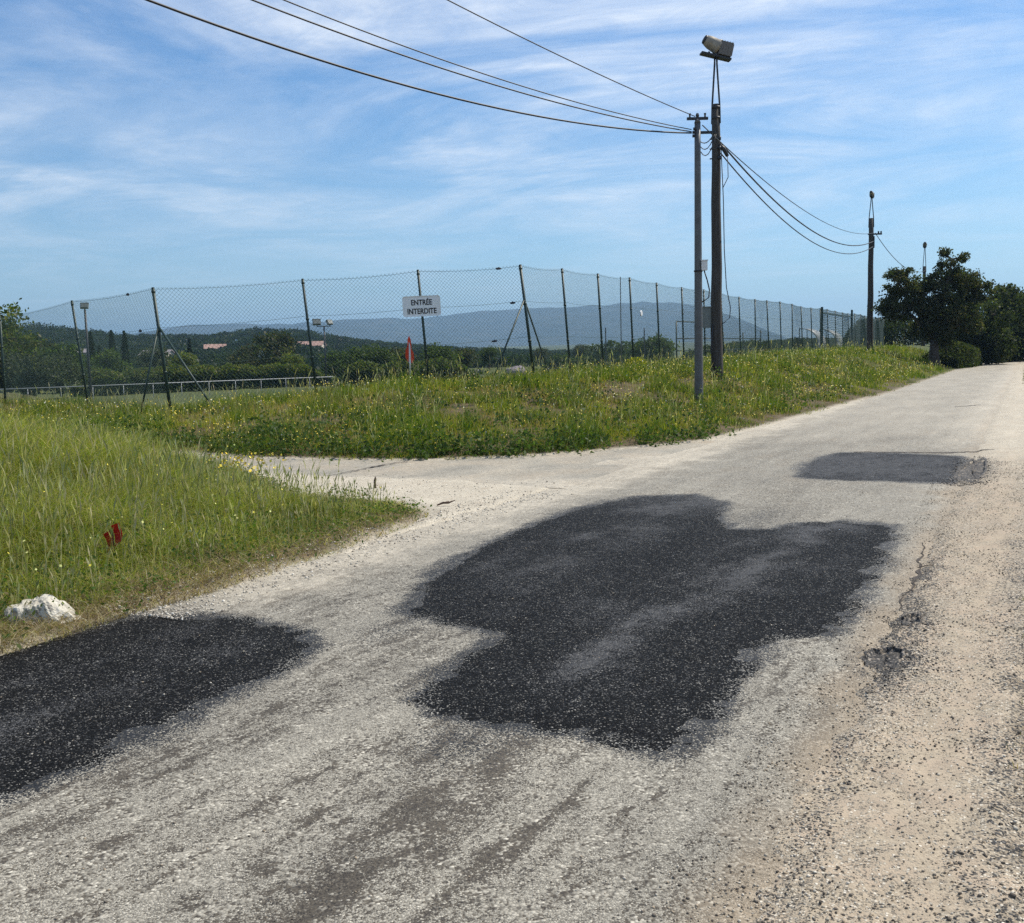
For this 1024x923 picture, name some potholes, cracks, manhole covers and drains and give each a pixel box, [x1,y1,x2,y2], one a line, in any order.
crack [899,543,934,608]
pothole [895,613,921,626]
pothole [858,645,906,672]
